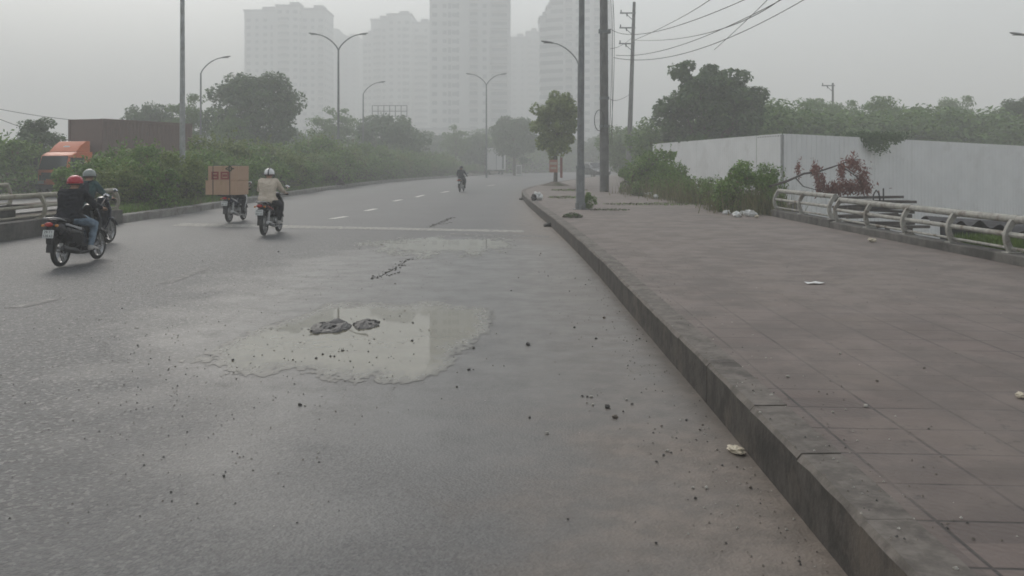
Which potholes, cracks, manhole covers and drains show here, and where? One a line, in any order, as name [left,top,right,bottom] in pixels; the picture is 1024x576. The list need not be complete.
crack [371,258,413,279]
